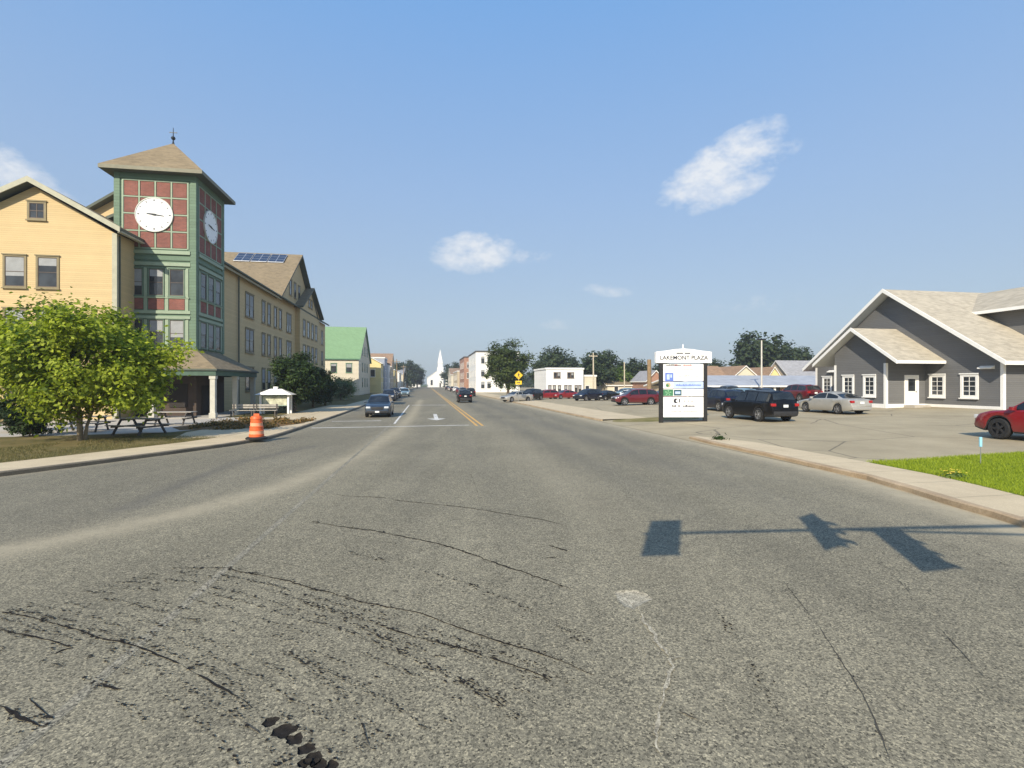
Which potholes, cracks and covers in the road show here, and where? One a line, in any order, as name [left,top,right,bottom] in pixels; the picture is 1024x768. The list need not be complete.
pothole [297,743,316,755]
crack [229,568,594,706]
pothole [310,758,327,768]
crack [313,521,570,589]
crack [785,583,890,759]
crack [345,475,558,524]
crack [2,611,285,757]
crack [638,606,701,752]
pothole [270,724,299,739]
pothole [285,732,303,745]
pothole [303,751,323,767]
pothole [261,716,280,727]
